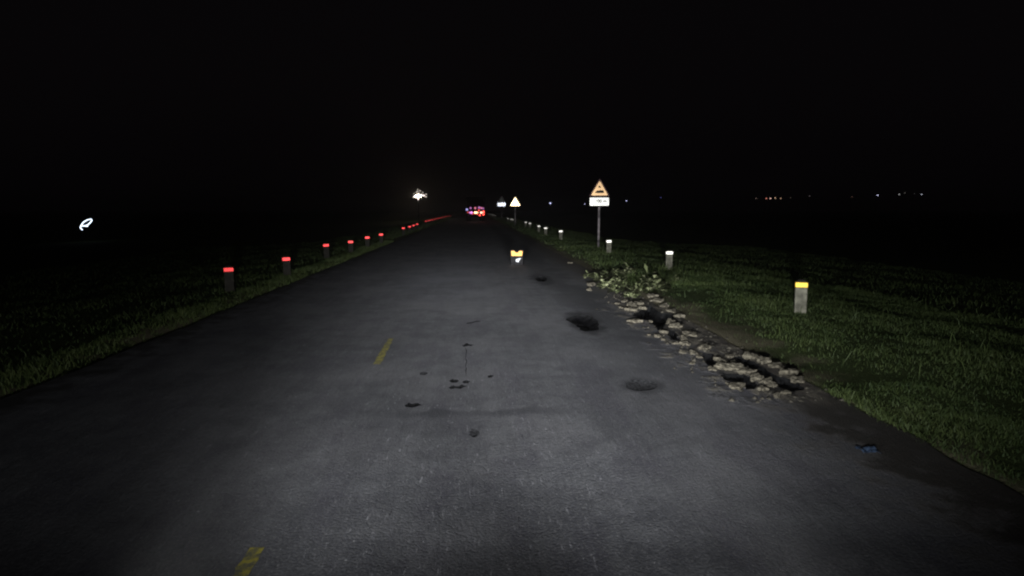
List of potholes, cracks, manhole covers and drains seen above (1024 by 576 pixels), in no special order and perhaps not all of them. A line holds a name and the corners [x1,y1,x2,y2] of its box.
pothole [566,314,599,331]
pothole [626,379,657,391]
